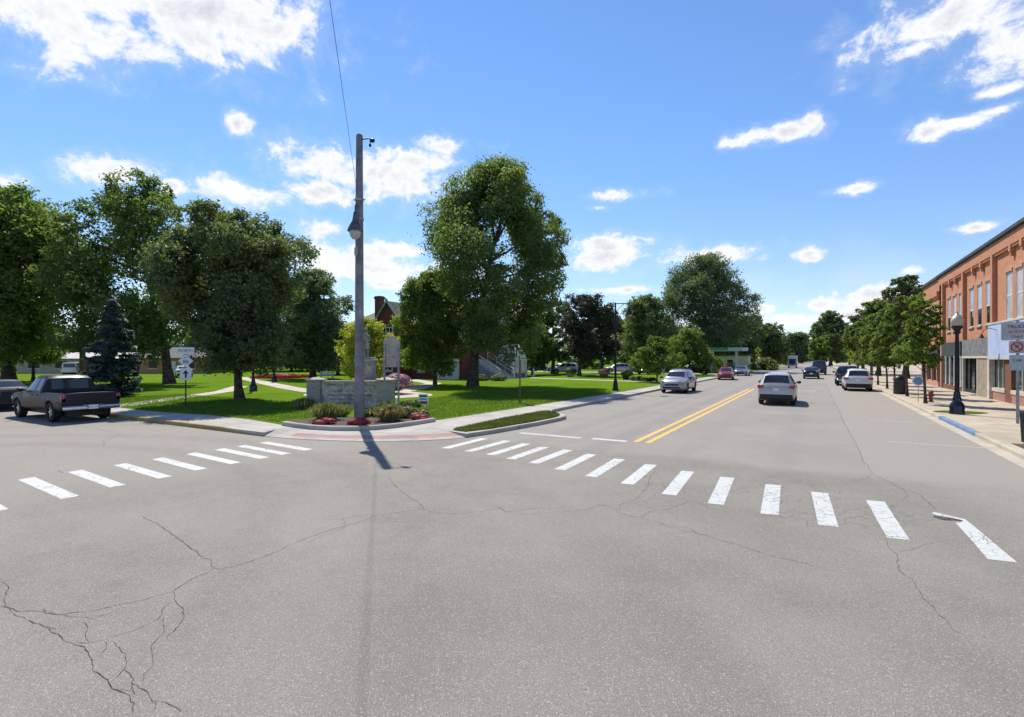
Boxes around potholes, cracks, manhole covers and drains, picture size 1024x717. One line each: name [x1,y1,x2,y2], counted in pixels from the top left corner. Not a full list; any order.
crack [2,509,417,711]
